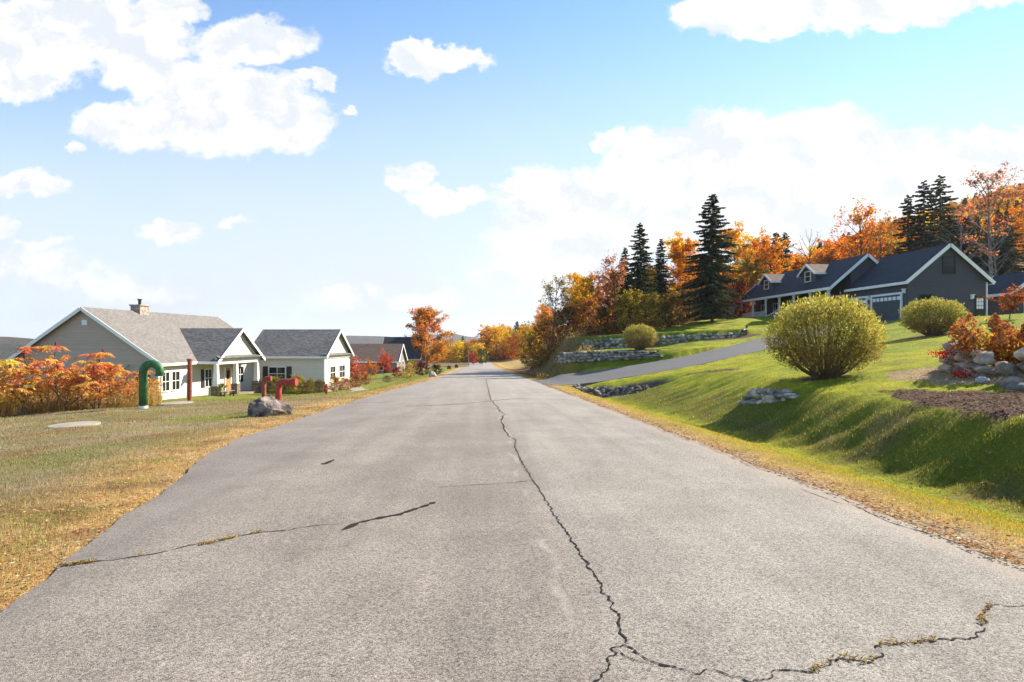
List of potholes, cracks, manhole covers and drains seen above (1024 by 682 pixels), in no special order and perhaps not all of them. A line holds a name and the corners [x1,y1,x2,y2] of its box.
crack [70,379,1024,682]
